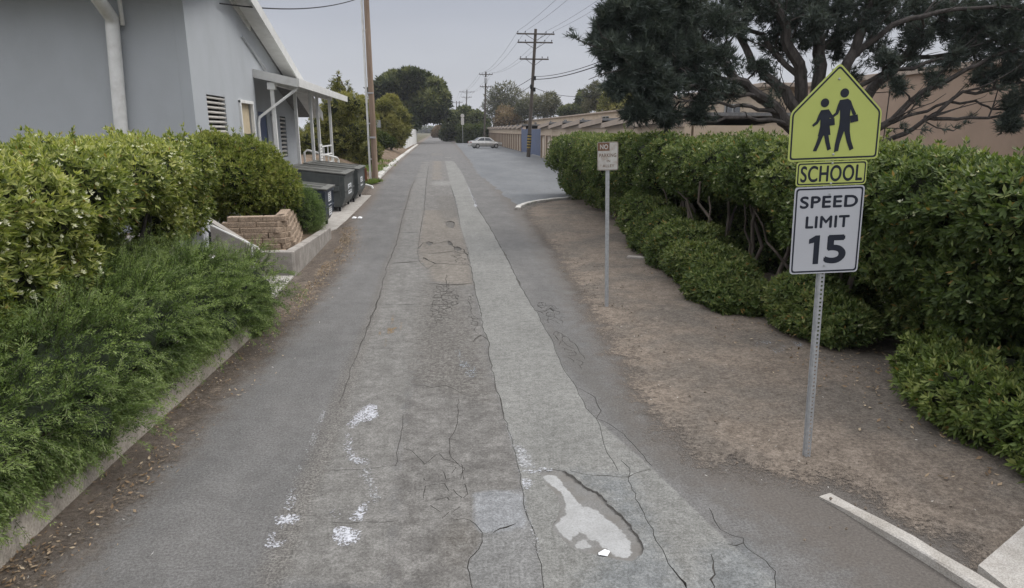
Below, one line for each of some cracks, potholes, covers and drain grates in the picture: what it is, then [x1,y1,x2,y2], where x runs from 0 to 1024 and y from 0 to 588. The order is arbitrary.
crack [473,198,687,588]
crack [709,508,776,588]
pothole [539,469,644,561]
crack [417,166,544,588]
crack [335,384,516,588]
